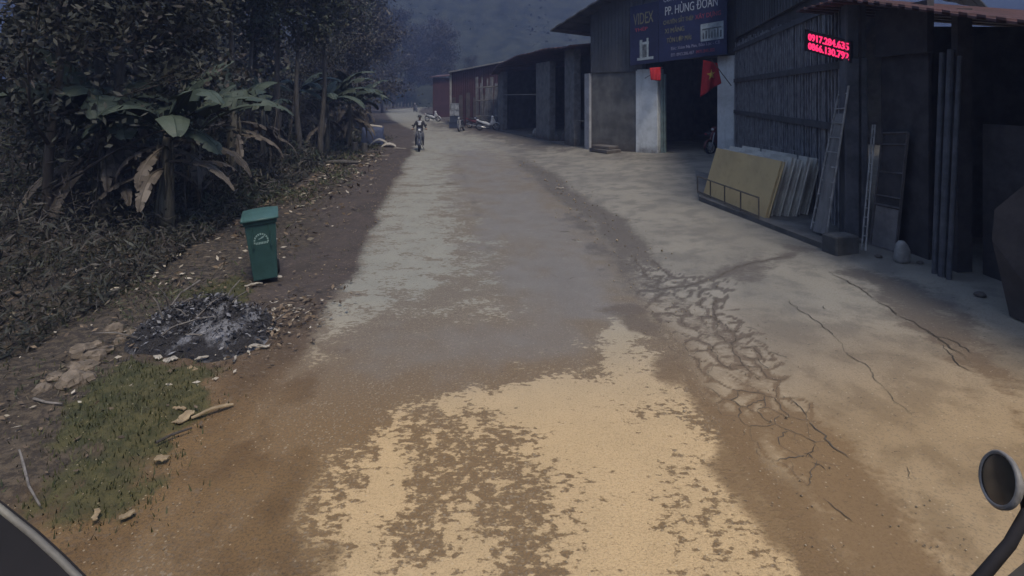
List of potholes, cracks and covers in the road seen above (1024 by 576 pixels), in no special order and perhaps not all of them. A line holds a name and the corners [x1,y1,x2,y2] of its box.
crack [789,302,911,413]
crack [830,272,974,372]
crack [627,255,849,485]
